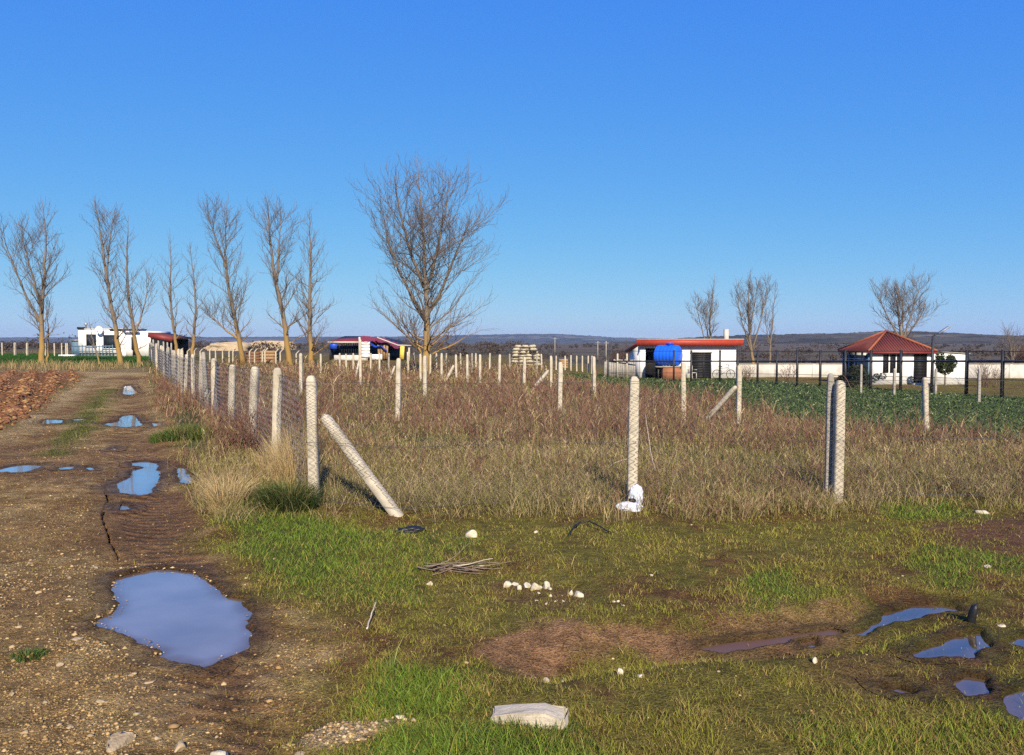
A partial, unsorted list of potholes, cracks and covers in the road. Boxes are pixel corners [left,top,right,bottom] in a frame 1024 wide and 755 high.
pothole [96,414,150,429]
pothole [67,562,276,678]
pothole [90,459,171,498]
pothole [116,383,145,397]
crack [87,483,140,566]
pothole [166,463,205,485]
pothole [0,461,56,474]
